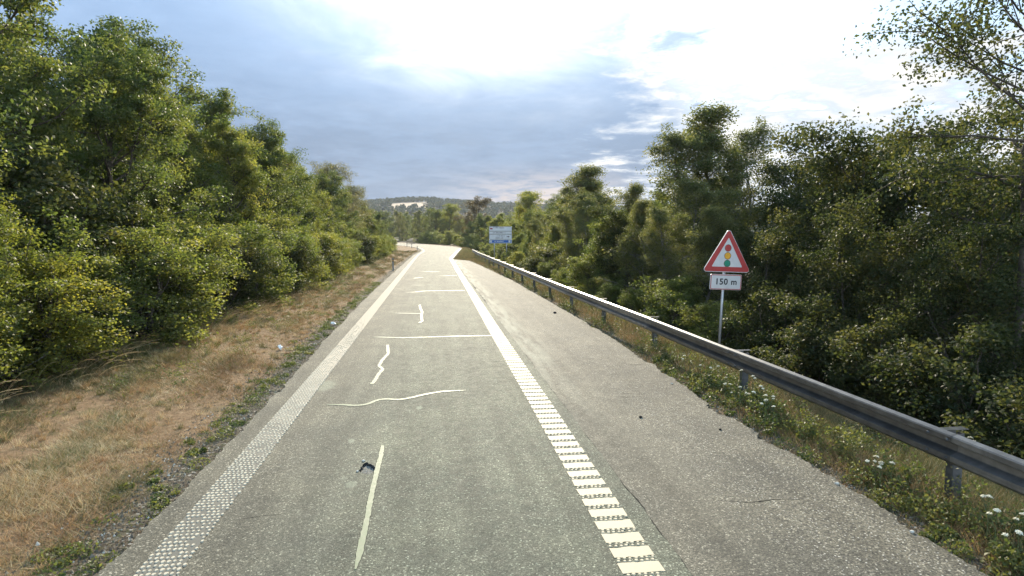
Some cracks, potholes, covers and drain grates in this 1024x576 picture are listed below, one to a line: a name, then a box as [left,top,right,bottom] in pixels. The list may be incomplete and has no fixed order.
pothole [359,462,375,474]
